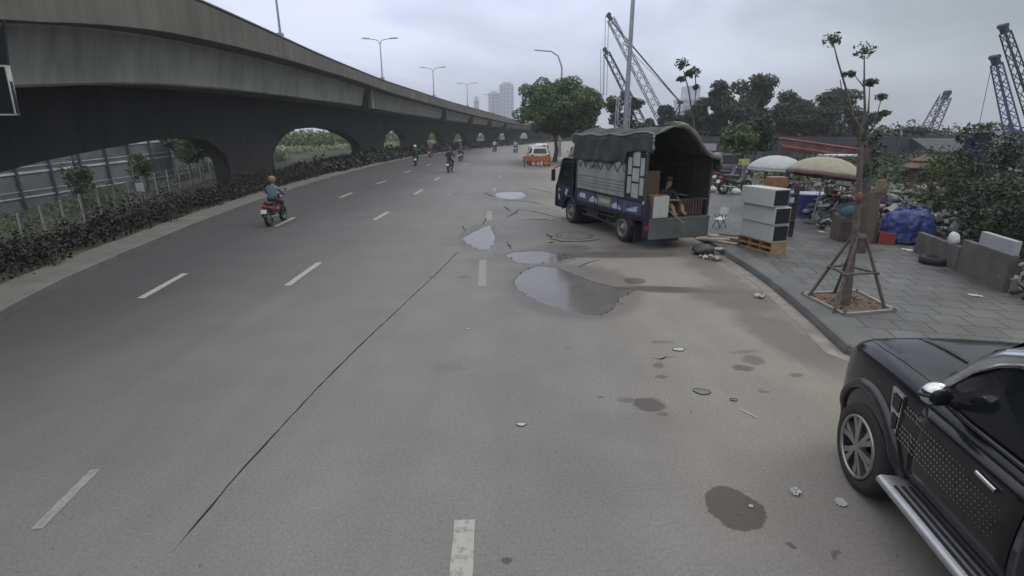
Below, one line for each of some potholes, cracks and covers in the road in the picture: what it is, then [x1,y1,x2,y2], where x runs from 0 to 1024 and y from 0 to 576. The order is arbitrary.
pothole [506,250,585,263]
crack [484,188,599,242]
pothole [513,266,637,315]
crack [172,253,457,553]
